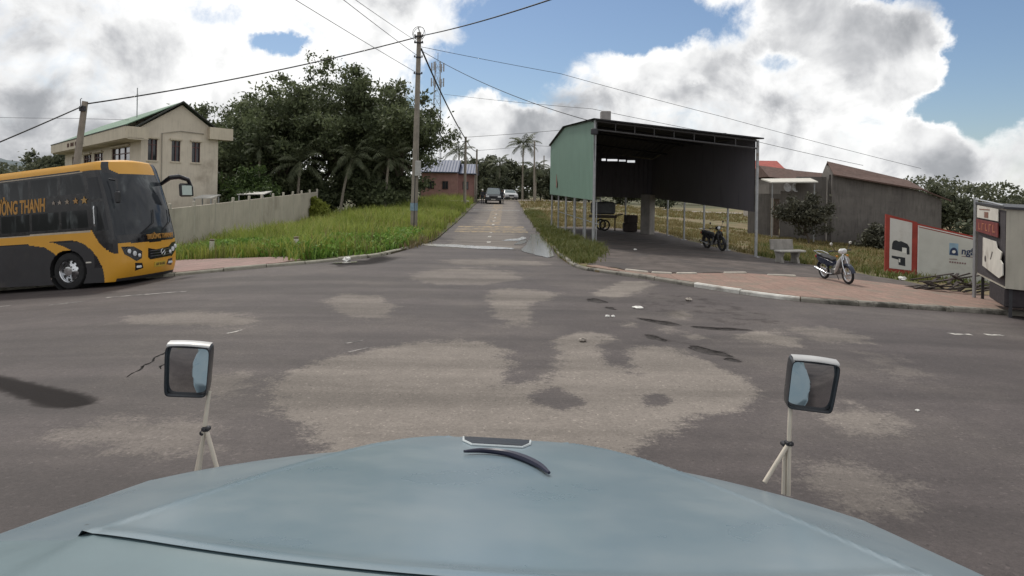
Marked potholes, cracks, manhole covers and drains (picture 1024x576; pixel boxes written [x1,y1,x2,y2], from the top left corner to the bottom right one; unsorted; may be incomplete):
pothole [639,318,682,326]
pothole [688,345,733,357]
